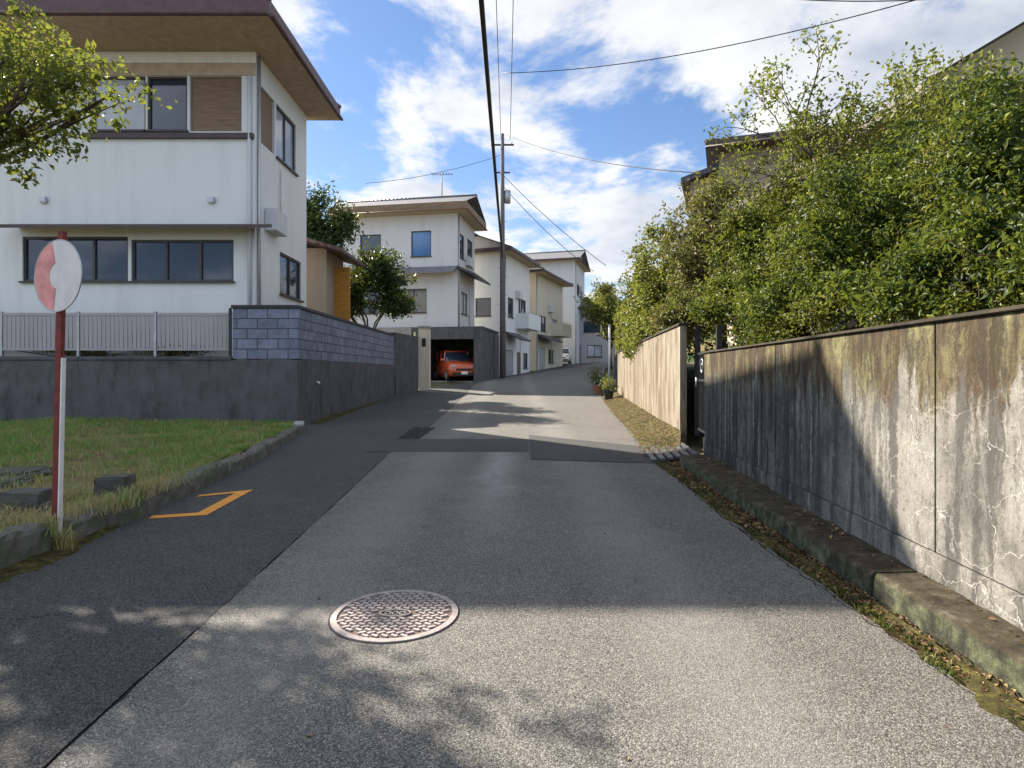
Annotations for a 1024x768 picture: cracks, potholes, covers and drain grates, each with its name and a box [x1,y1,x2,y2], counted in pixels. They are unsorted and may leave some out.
manhole cover [328,590,460,644]
